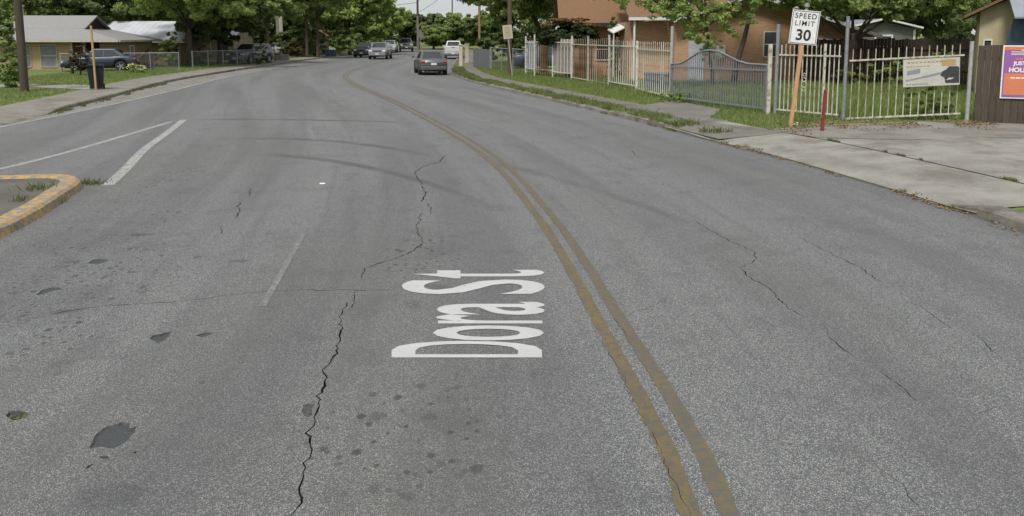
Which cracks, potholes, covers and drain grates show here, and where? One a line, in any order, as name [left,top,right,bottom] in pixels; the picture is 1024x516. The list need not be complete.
crack [697,221,917,401]
crack [1,155,446,516]
crack [799,237,1002,359]
